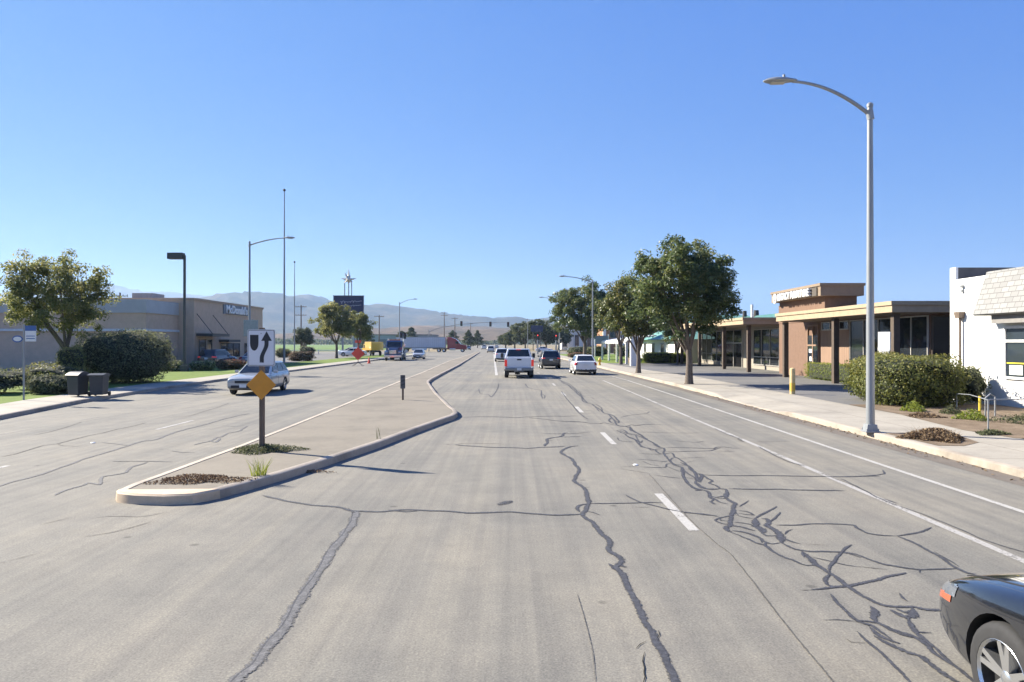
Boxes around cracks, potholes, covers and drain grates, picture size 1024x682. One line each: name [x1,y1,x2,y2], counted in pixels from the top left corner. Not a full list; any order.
crack [595,494,717,516]
crack [577,594,596,682]
crack [703,470,885,491]
crack [454,416,613,448]
crack [6,403,228,456]
crack [175,425,247,452]
crack [262,495,577,515]
